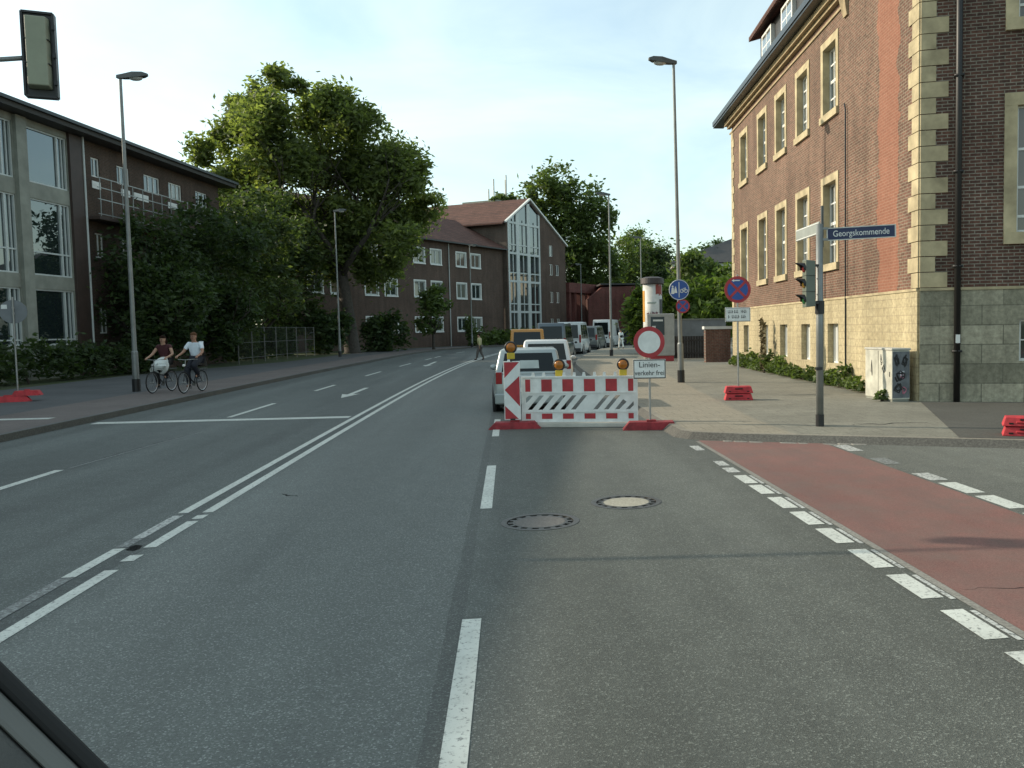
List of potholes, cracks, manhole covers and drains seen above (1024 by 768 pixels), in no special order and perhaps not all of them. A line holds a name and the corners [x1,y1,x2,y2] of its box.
manhole cover [591,495,661,509]
manhole cover [501,513,579,531]
